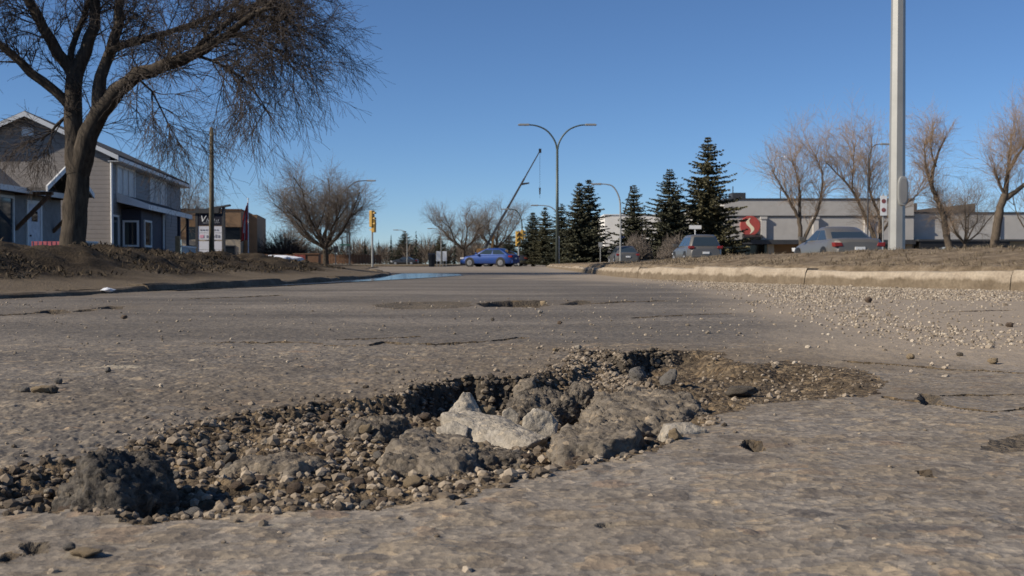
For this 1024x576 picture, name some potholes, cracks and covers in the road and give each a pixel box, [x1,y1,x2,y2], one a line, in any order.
crack [842,360,1020,374]
pothole [476,300,551,308]
crack [881,394,1024,413]
pothole [0,348,889,526]
crack [213,336,529,346]
